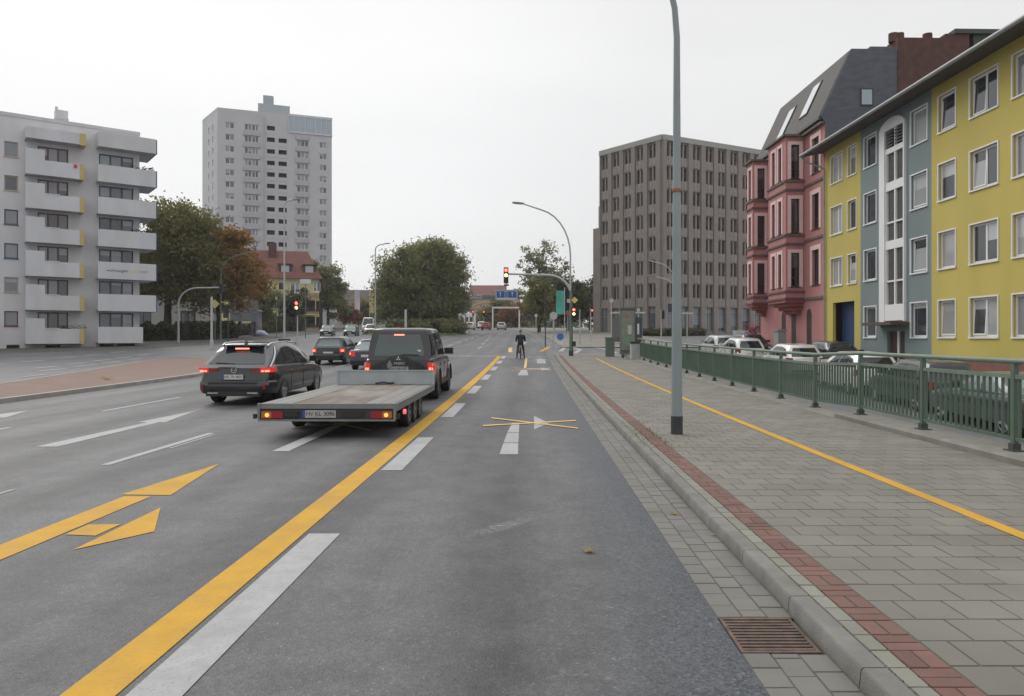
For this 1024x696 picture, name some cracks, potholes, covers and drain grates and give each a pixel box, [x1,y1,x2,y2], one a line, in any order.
drain grate [719,618,822,654]
